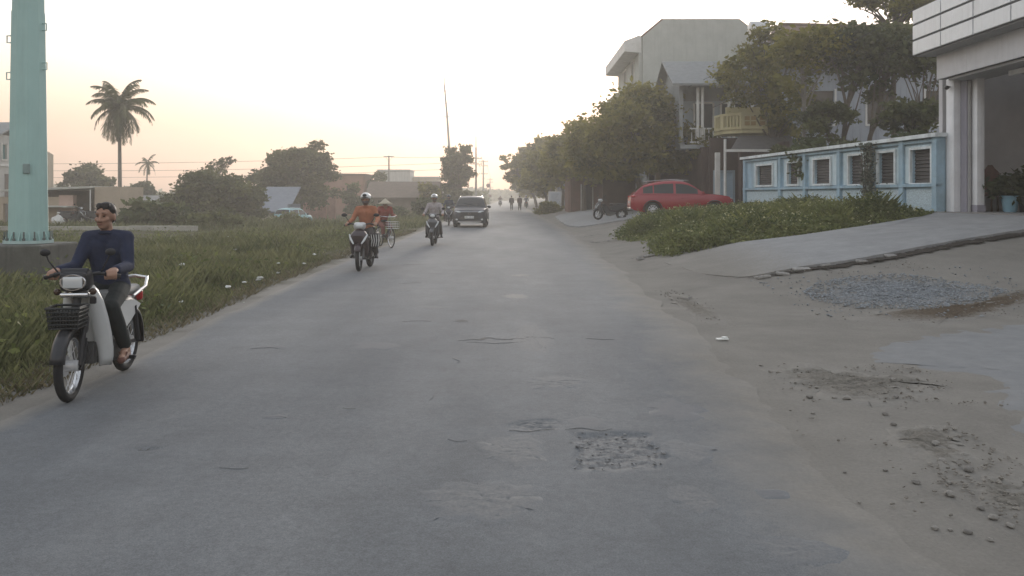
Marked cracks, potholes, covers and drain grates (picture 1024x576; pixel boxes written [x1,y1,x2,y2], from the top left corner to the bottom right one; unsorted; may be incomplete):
pothole [507,420,562,430]
crack [453,336,550,362]
pothole [571,432,668,471]
